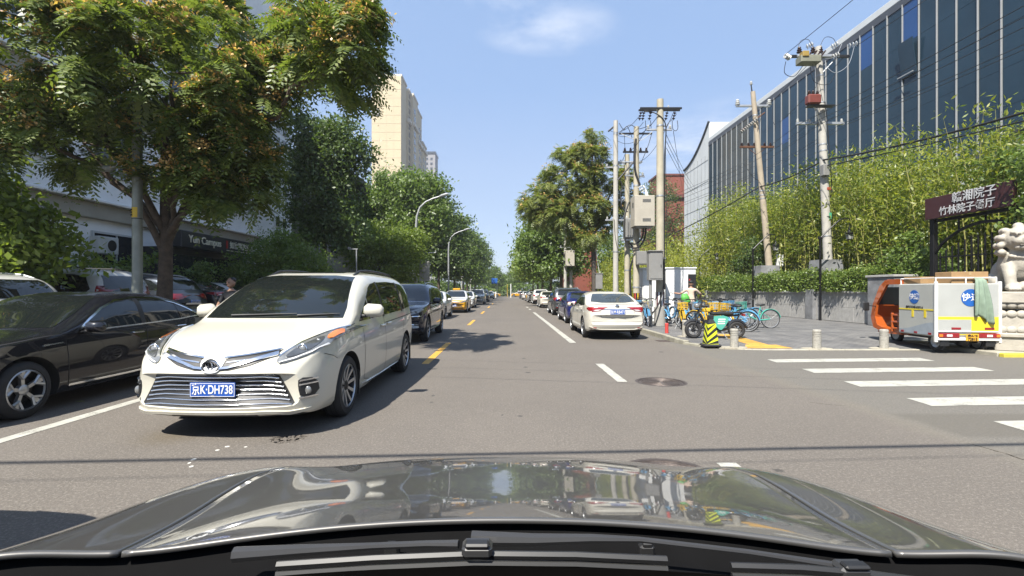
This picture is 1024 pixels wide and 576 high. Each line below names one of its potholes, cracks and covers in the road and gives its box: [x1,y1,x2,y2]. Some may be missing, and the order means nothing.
manhole cover [635,377,688,387]
